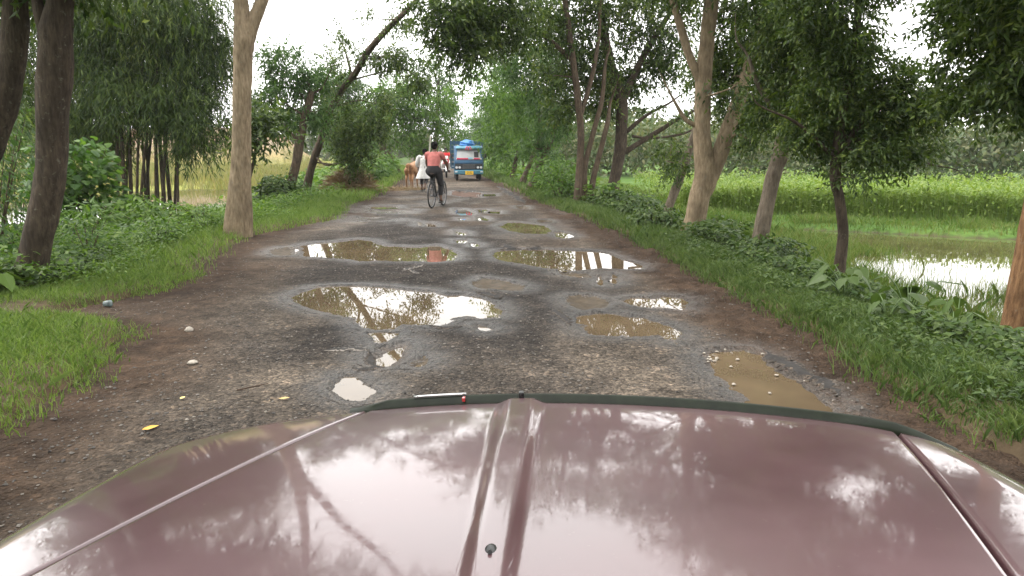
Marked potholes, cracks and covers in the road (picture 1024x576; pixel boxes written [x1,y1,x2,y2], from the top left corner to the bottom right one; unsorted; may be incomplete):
pothole [486,248,651,274]
pothole [565,308,698,347]
pothole [492,221,558,235]
pothole [461,276,536,293]
pothole [450,207,479,216]
pothole [605,293,699,312]
pothole [688,343,864,416]
pothole [313,367,395,406]
pothole [353,336,426,370]
pothole [290,237,465,263]
pothole [278,282,514,334]
